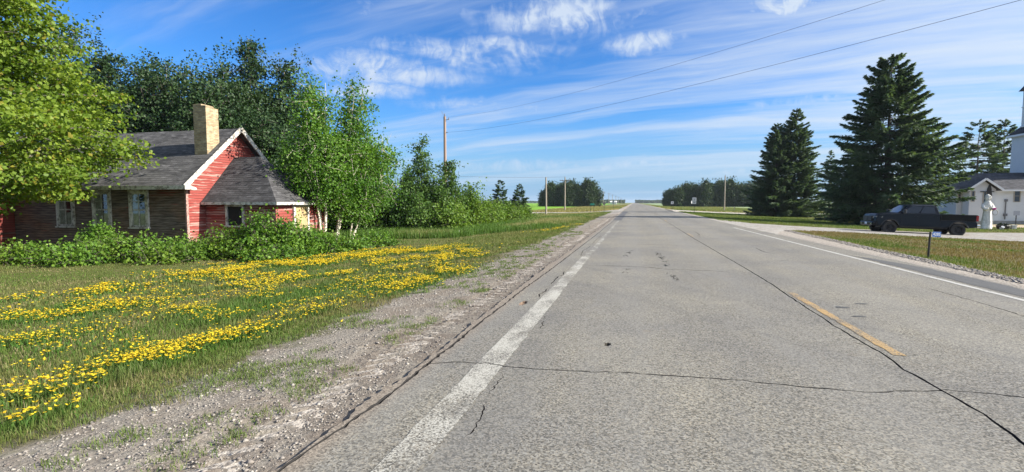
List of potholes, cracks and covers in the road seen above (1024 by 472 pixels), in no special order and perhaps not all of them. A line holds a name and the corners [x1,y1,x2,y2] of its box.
crack [426,216,1024,445]
